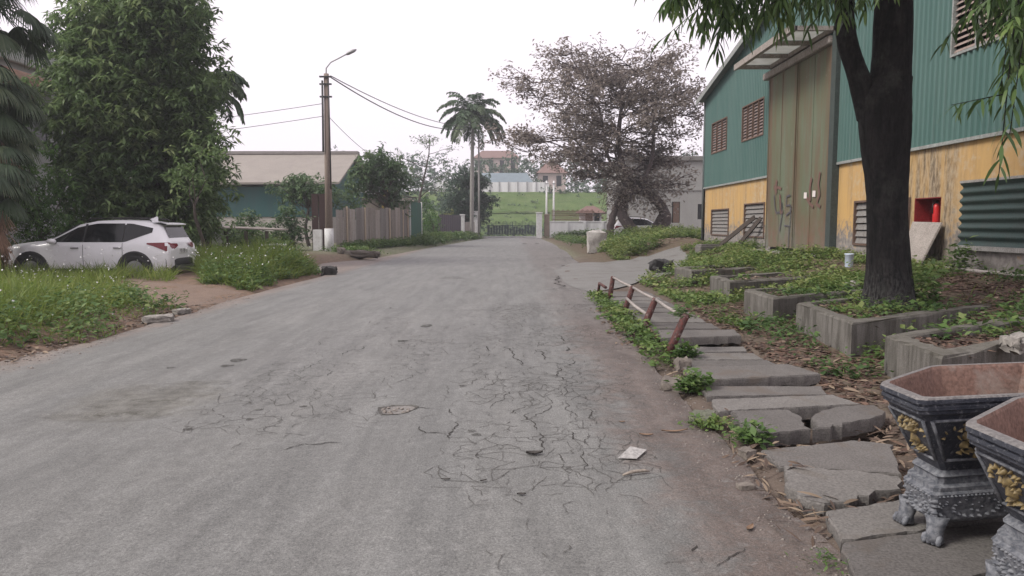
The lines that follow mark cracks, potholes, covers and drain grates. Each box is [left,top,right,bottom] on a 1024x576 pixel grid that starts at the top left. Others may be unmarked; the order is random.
crack [240,257,647,528]
